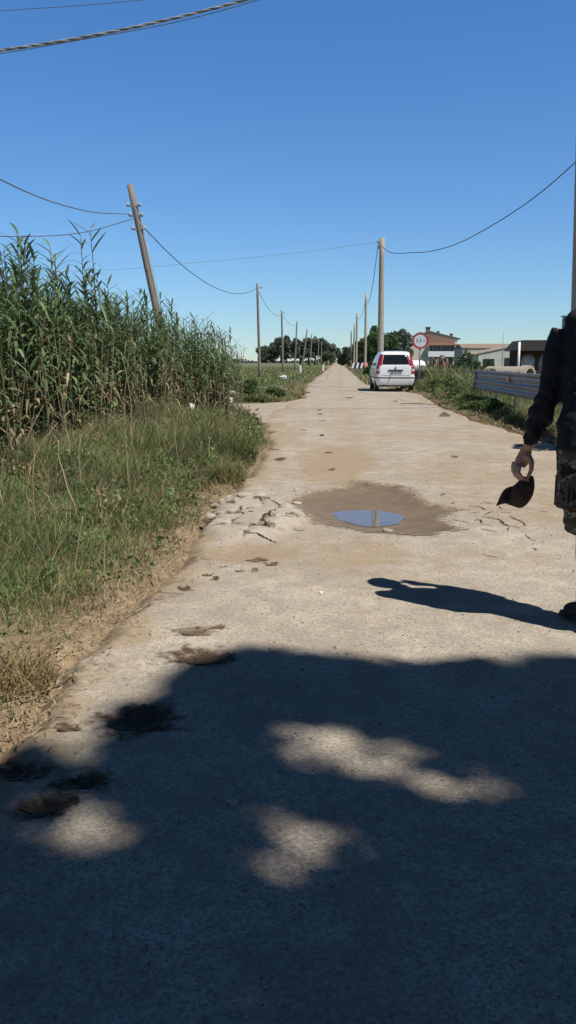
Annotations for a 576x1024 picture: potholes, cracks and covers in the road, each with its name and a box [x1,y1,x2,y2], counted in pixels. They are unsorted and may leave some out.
pothole [47,769,112,788]
crack [441,493,537,550]
pothole [0,761,54,780]
pothole [15,792,81,816]
pothole [179,627,213,636]
pothole [293,481,468,535]
pothole [176,648,236,665]
crack [238,496,301,542]
pothole [107,704,178,731]
